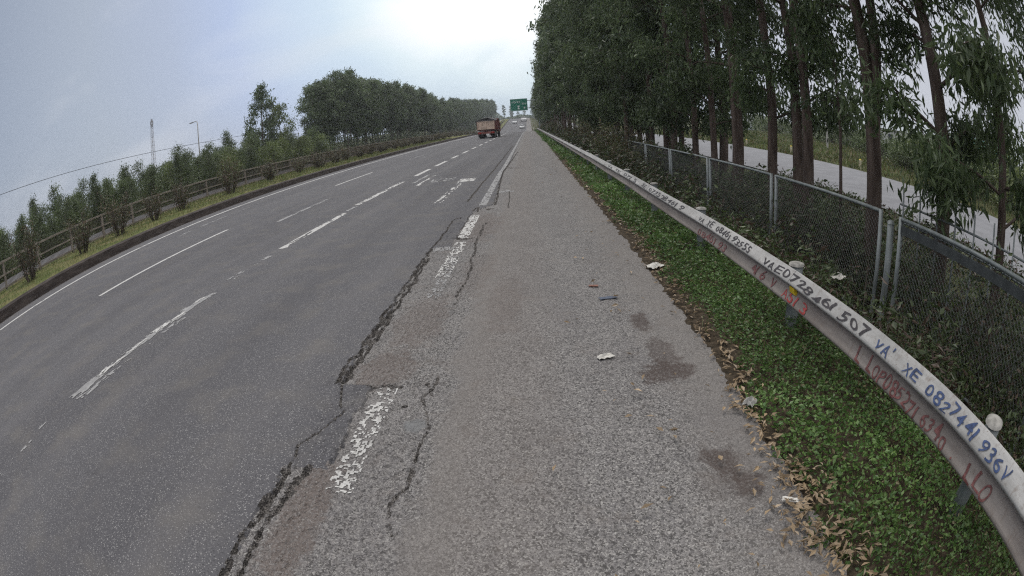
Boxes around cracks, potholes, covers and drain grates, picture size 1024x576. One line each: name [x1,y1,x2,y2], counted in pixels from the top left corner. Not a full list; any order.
crack [287,385,345,470]
crack [365,375,440,537]
